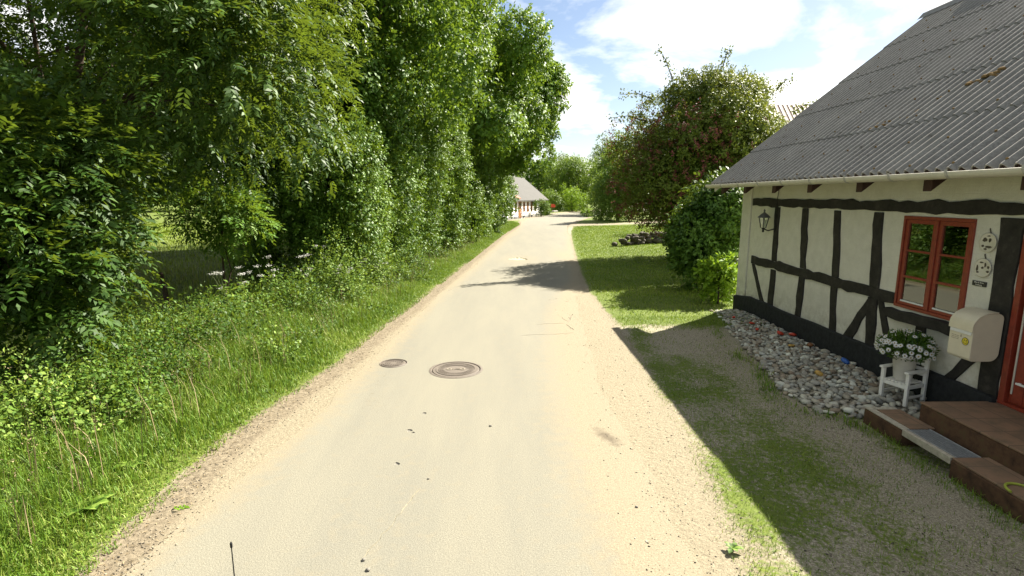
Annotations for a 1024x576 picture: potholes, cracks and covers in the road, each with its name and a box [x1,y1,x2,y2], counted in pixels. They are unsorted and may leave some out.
crack [364,490,419,557]
manhole cover [429,361,483,379]
manhole cover [379,359,408,368]
